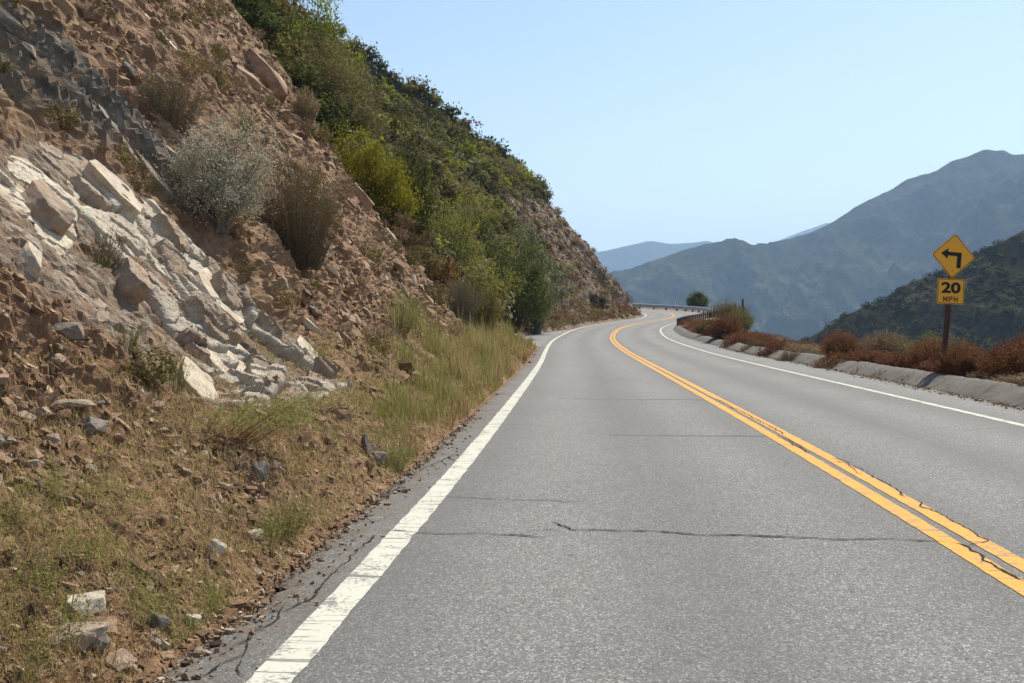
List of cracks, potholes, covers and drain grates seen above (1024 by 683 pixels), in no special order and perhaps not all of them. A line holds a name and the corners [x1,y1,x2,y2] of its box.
crack [391,521,933,541]
crack [836,458,1021,580]
crack [204,534,375,677]
crack [718,399,810,454]
